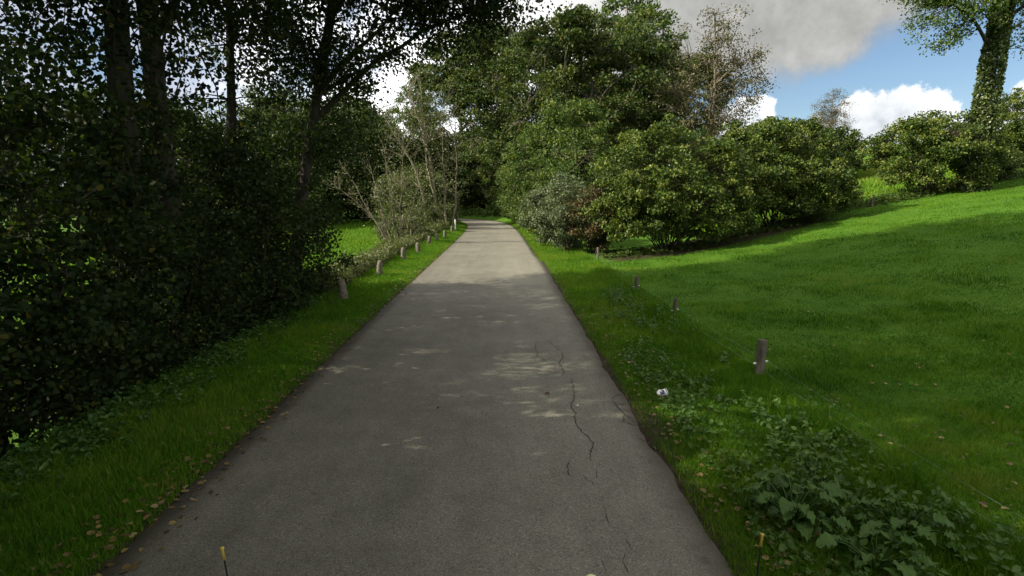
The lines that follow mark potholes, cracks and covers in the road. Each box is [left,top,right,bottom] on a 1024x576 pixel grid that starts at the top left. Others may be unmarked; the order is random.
crack [535,341,655,574]
